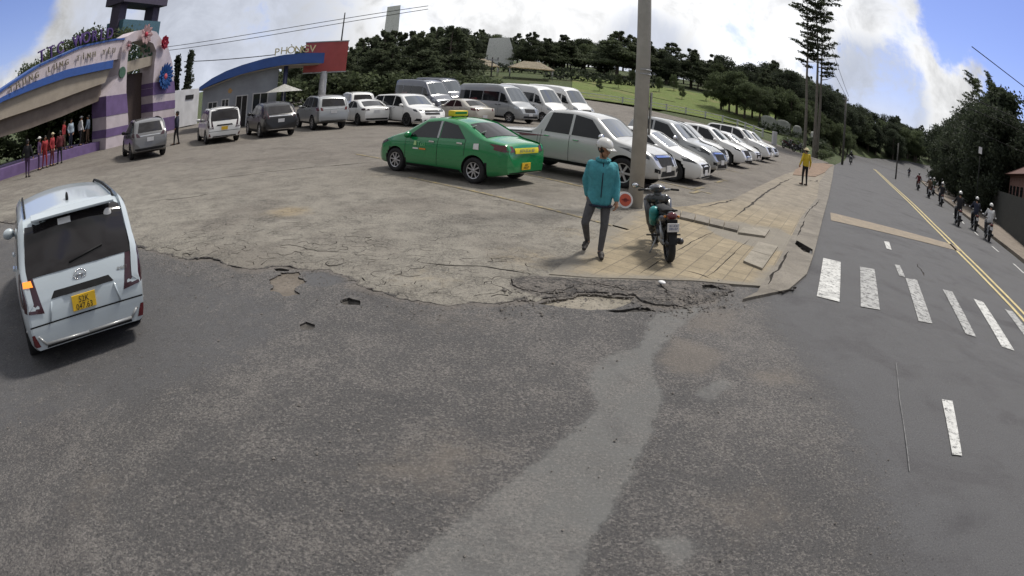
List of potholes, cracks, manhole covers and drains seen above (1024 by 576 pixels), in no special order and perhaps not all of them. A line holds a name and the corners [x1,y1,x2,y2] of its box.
crack [163,213,688,298]
crack [703,178,792,215]
crack [157,162,369,201]
pothole [538,294,631,310]
pothole [269,272,306,296]
